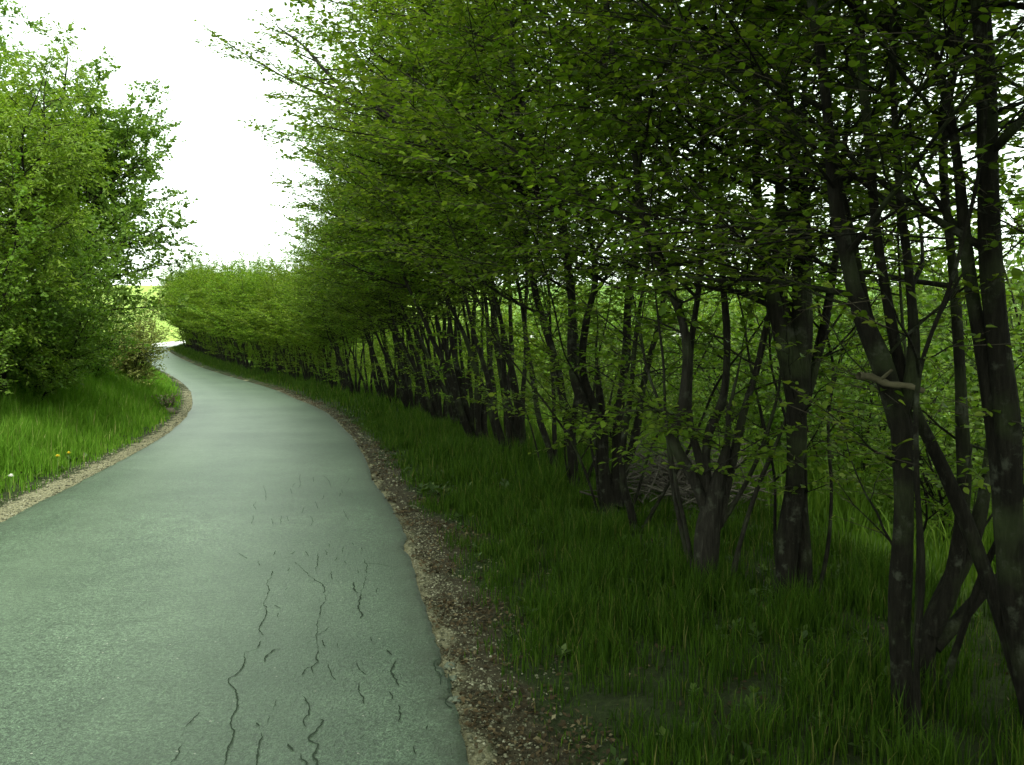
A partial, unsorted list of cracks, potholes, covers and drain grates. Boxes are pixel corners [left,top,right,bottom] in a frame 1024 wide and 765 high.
crack [224,543,382,765]
crack [370,637,401,722]
